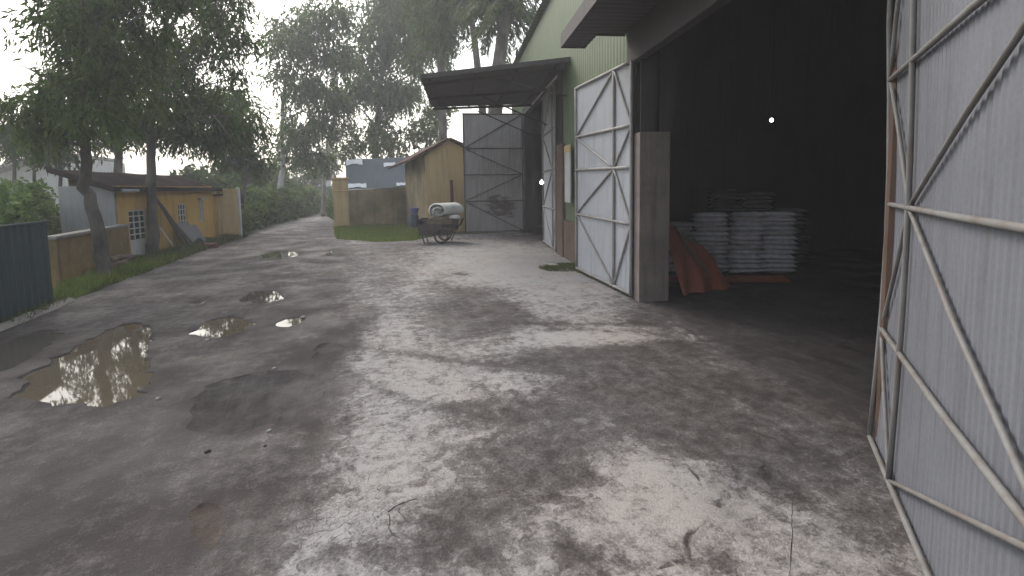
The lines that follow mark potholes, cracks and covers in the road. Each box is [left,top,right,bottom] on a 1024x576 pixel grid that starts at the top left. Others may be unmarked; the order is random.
pothole [238,290,285,304]
pothole [8,322,156,407]
crack [657,524,705,570]
crack [686,466,703,488]
crack [293,469,419,555]
pothole [188,316,257,338]
pothole [259,251,300,259]
pothole [274,315,306,327]
